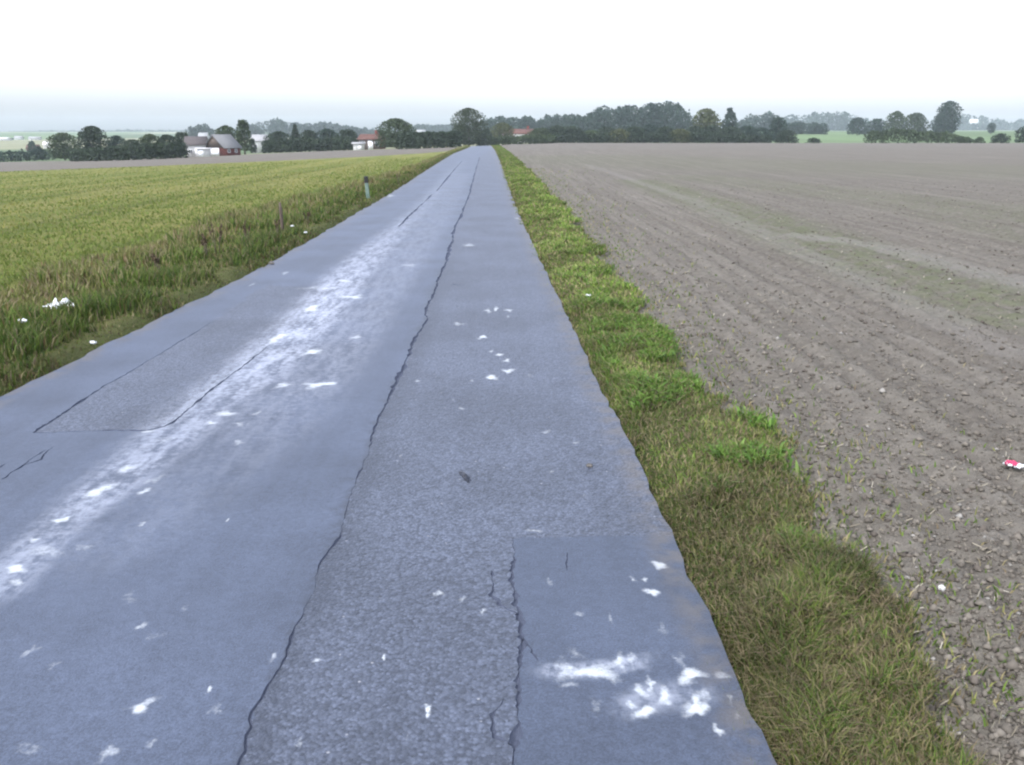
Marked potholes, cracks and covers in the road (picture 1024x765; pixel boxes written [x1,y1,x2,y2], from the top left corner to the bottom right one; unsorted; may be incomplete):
crack [488,545,538,765]
crack [0,322,266,480]
crack [237,157,480,765]
